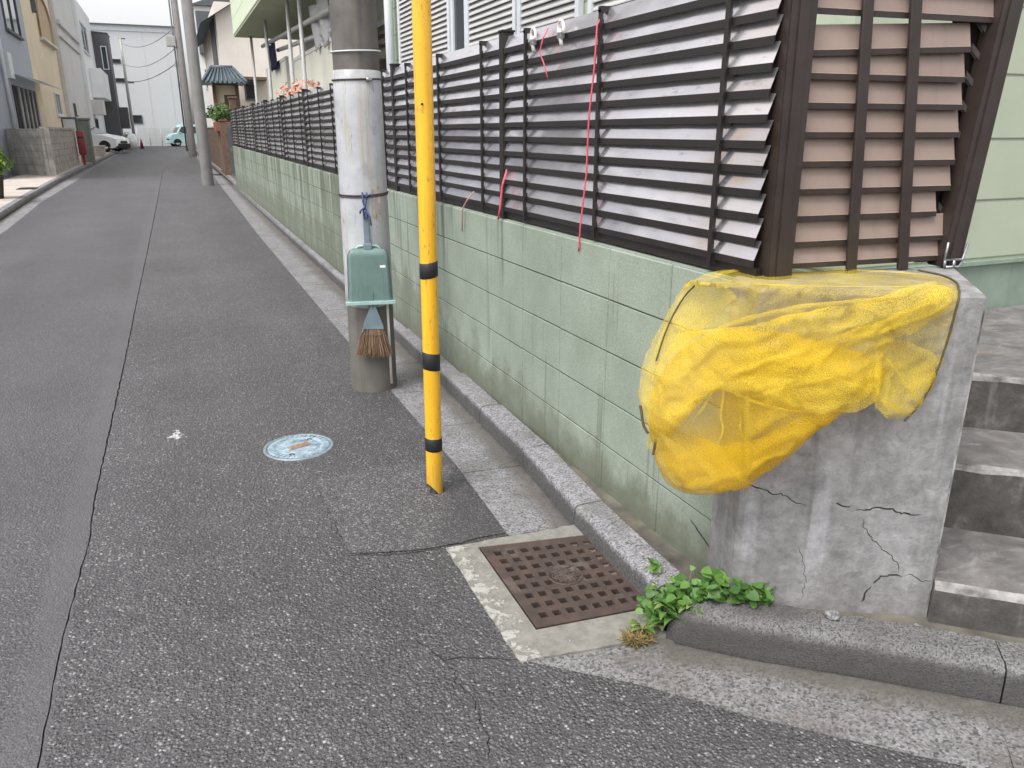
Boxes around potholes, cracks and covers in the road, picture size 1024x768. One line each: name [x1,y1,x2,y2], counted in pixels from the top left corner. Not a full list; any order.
drain grate [446,525,666,662]
manhole cover [263,433,334,461]
crack [417,640,514,762]
